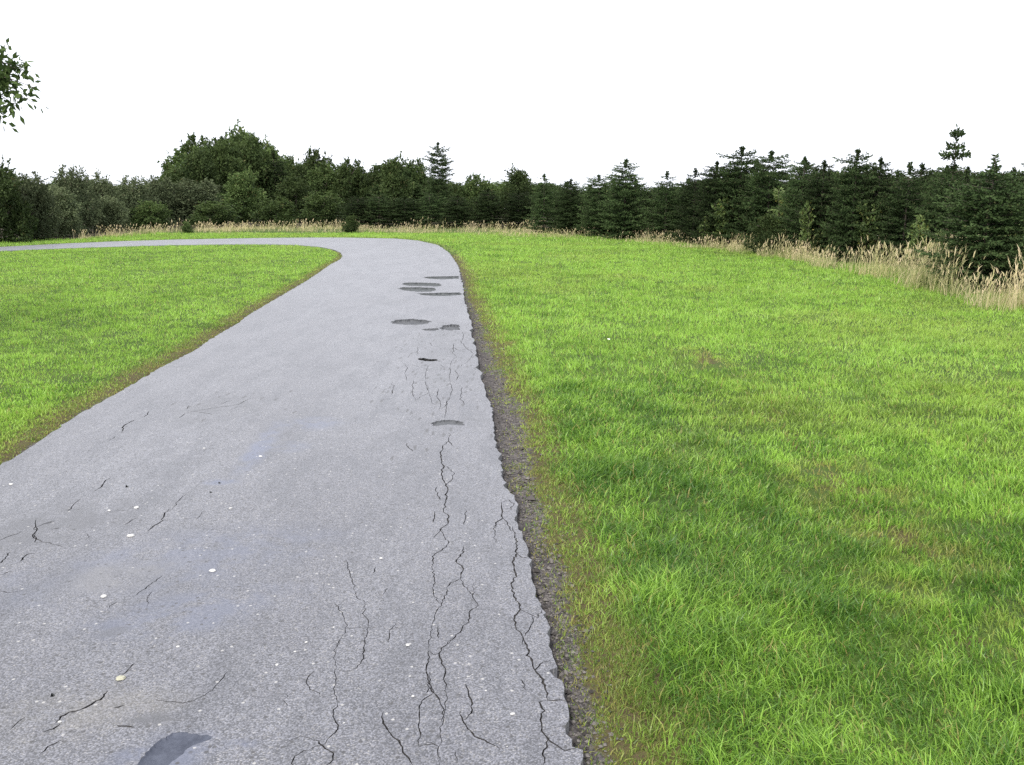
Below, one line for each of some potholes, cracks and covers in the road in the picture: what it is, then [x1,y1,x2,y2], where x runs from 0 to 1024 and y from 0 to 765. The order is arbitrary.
crack [494,500,575,765]
crack [41,691,135,753]
crack [283,562,374,765]
crack [392,332,472,414]
pothole [138,732,212,765]
crack [381,436,497,765]
crack [1,500,131,593]
